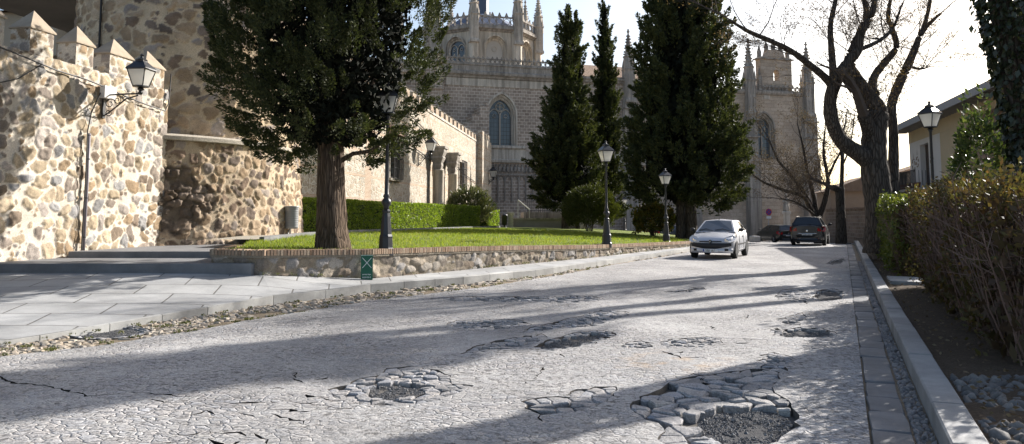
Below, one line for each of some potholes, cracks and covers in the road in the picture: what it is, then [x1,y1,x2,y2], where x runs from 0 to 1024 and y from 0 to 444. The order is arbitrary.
crack [0,372,351,444]
pothole [534,330,616,351]
pothole [328,366,474,406]
pothole [770,327,837,338]
pothole [812,289,845,301]
pothole [630,368,801,444]
